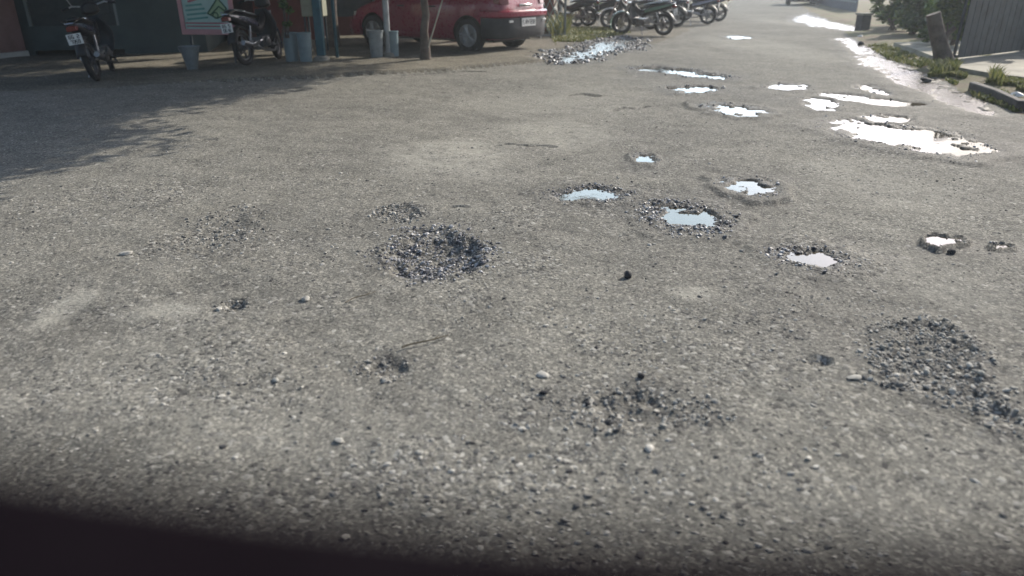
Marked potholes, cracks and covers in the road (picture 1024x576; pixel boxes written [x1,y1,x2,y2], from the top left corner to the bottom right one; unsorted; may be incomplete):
pothole [533,183,638,203]
pothole [760,82,812,90]
pothole [618,65,740,80]
pothole [363,221,511,287]
pothole [548,381,737,436]
pothole [857,113,917,123]
pothole [631,152,660,163]
pothole [756,244,871,277]
pothole [625,198,745,240]
pothole [368,202,433,223]
pothole [350,354,412,383]
pothole [530,35,653,66]
